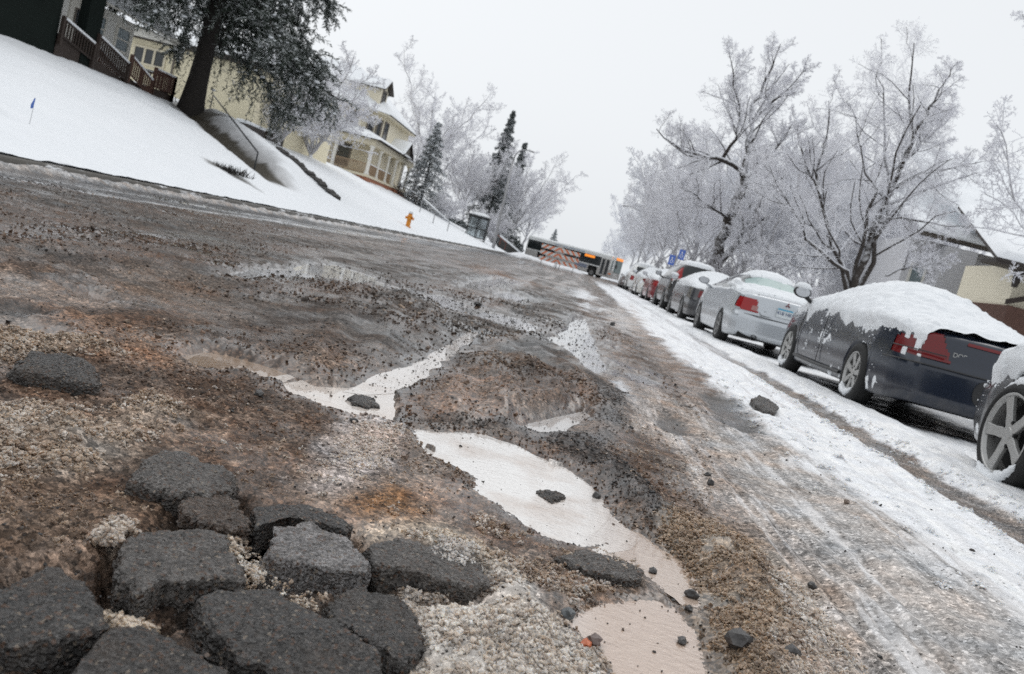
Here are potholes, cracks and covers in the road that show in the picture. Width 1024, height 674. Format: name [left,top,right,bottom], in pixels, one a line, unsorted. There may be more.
crack [235,497,357,615]
pothole [504,392,609,433]
pothole [542,584,749,674]
crack [92,545,118,610]
crack [160,620,187,637]
pothole [397,420,649,554]
